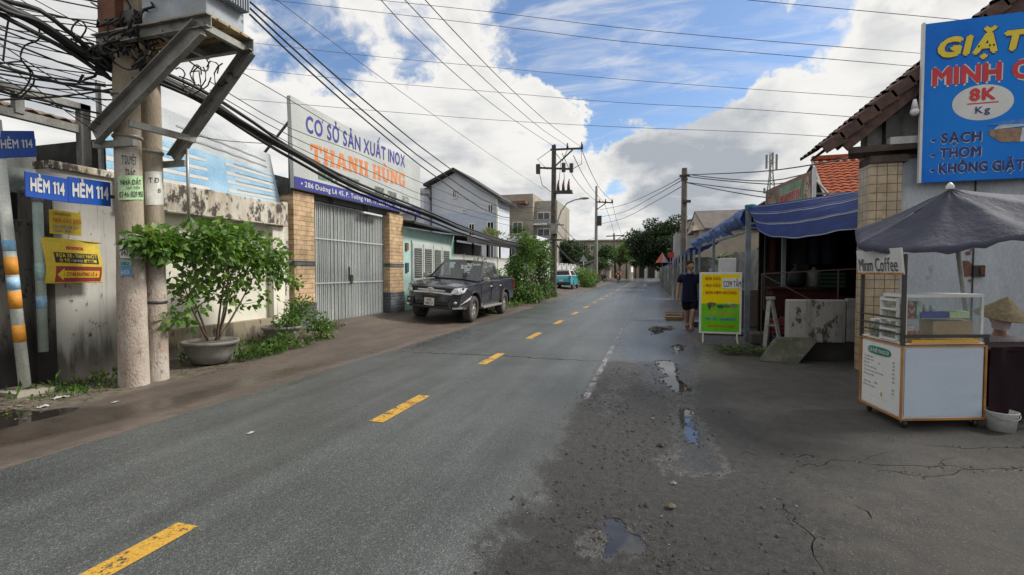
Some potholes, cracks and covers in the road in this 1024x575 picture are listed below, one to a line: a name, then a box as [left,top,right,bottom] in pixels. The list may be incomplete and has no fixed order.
pothole [654,360,689,392]
pothole [600,517,648,563]
pothole [679,408,700,445]
crack [782,503,835,574]
crack [790,441,1024,477]
